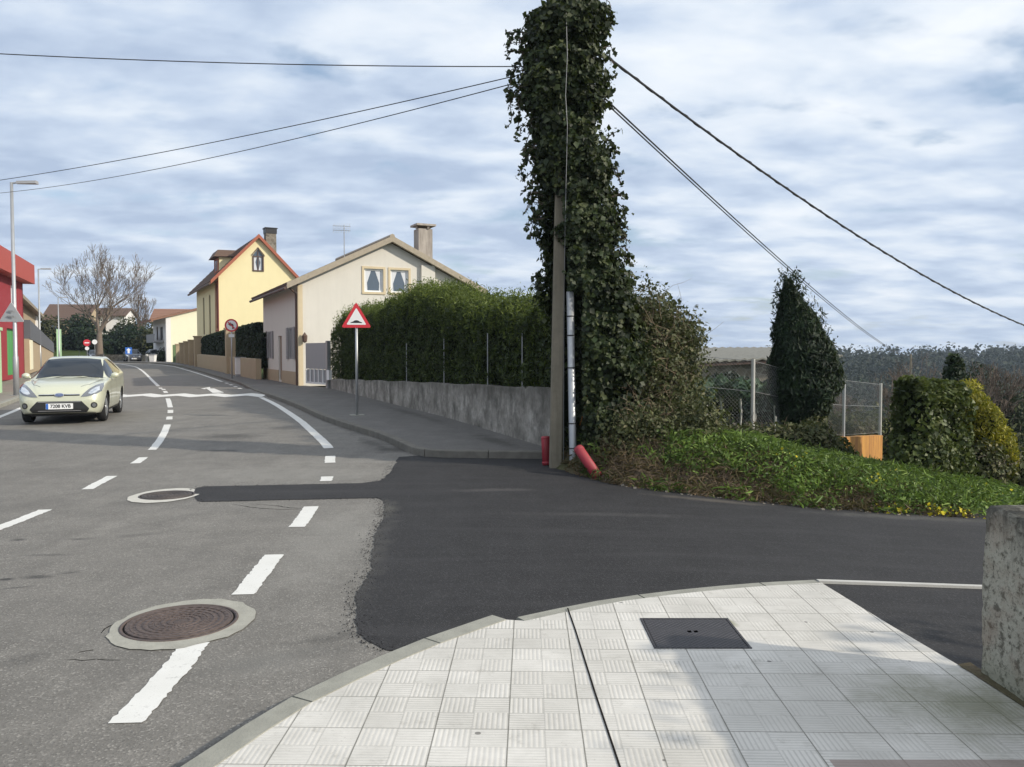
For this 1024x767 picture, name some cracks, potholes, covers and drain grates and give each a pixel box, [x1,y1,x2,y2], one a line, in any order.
utility cover [640,618,752,649]
manhole cover [105,599,256,650]
manhole cover [127,488,198,503]
